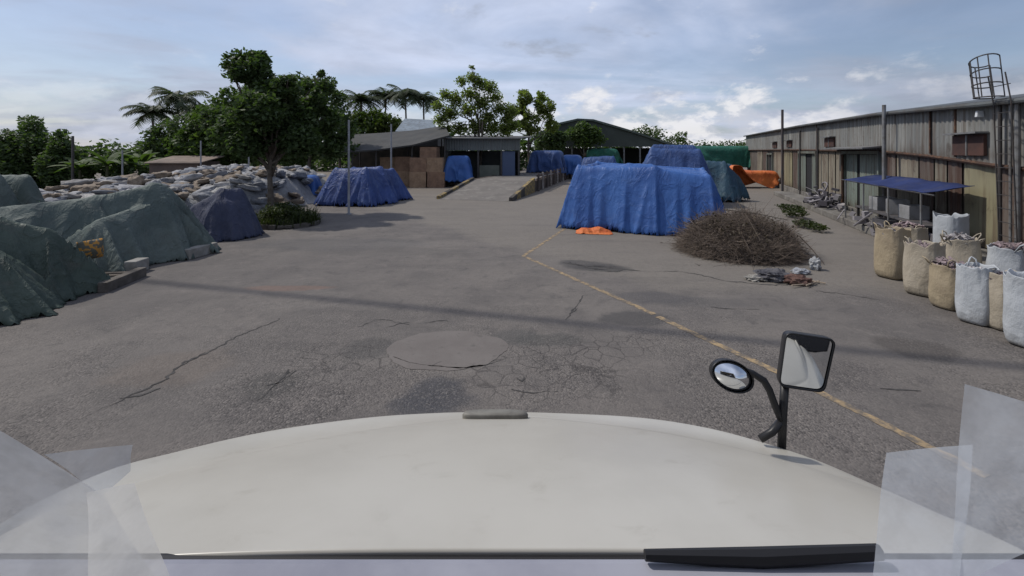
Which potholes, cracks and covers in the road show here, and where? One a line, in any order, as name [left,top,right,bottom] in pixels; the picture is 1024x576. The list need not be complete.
crack [86,318,280,416]
crack [395,350,561,393]
crack [258,369,295,400]
